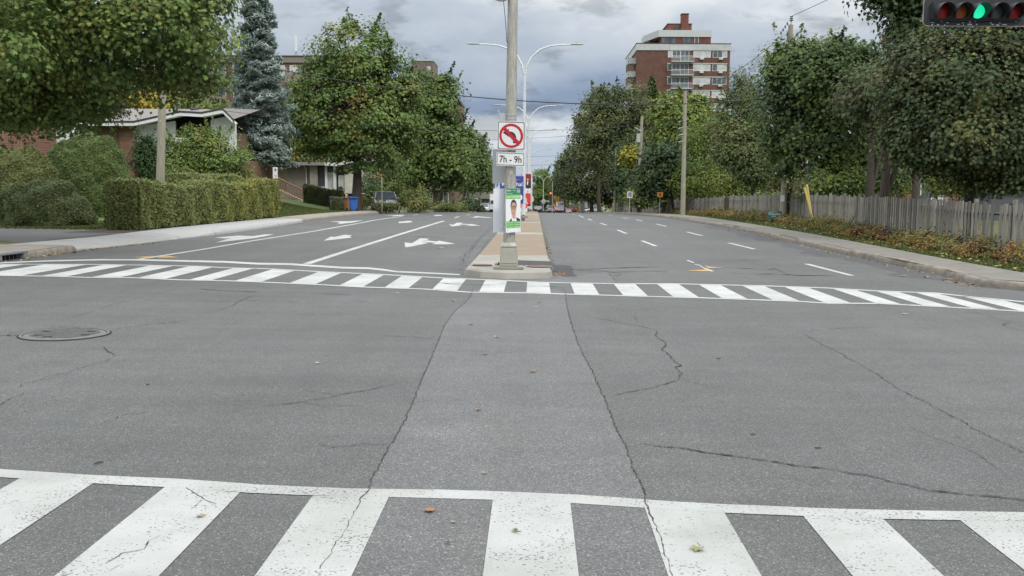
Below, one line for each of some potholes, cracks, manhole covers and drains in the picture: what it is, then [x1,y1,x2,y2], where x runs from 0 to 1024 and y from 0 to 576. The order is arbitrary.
drain grate [0,251,28,262]
crack [805,327,1021,468]
manhole cover [16,328,112,341]
crack [106,487,217,569]
crack [595,315,715,395]
crack [644,443,1024,500]
